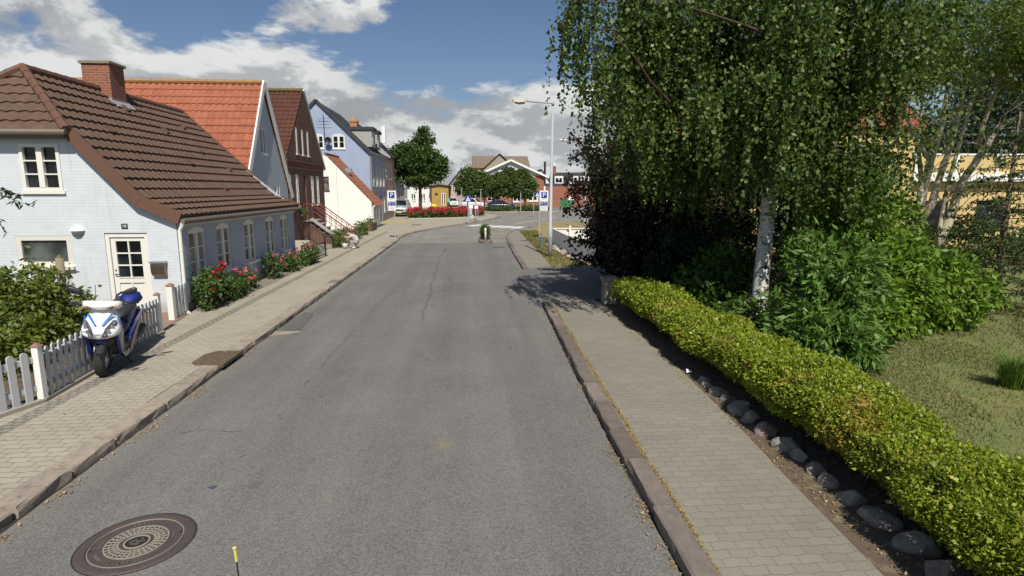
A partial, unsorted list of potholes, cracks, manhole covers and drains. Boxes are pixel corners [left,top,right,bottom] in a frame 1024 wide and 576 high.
crack [421,249,472,321]
crack [304,289,394,387]
manhole cover [70,513,197,576]
